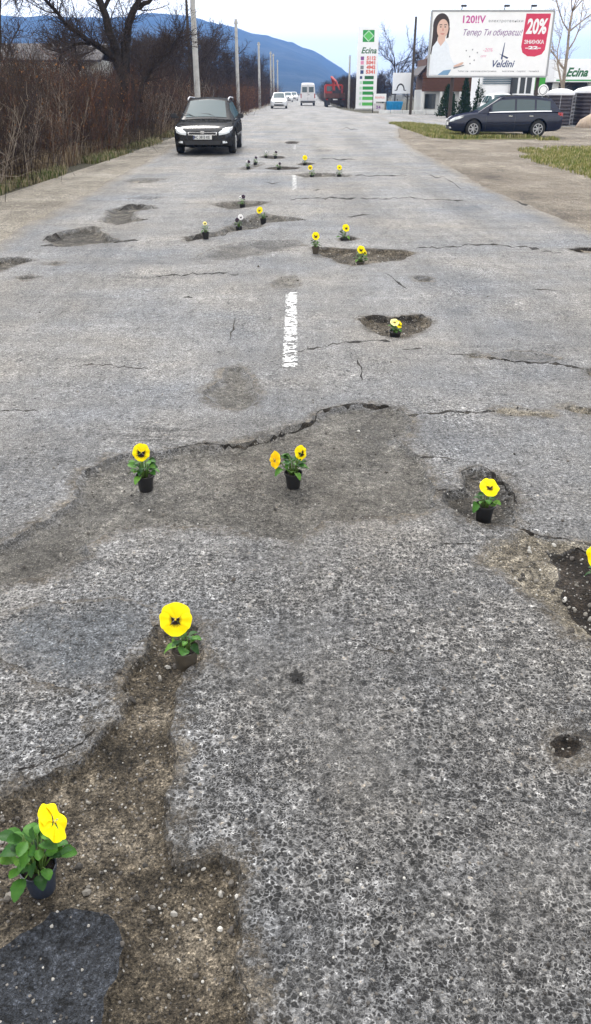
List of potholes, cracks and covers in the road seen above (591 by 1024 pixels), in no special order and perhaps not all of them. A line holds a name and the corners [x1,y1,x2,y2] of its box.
pothole [102,204,155,225]
pothole [0,404,437,585]
pothole [549,734,583,758]
pothole [358,314,433,338]
pothole [482,530,591,643]
pothole [441,467,518,526]
pothole [0,256,36,271]
pothole [493,404,559,418]
pothole [0,622,254,1024]
pothole [184,214,305,242]
